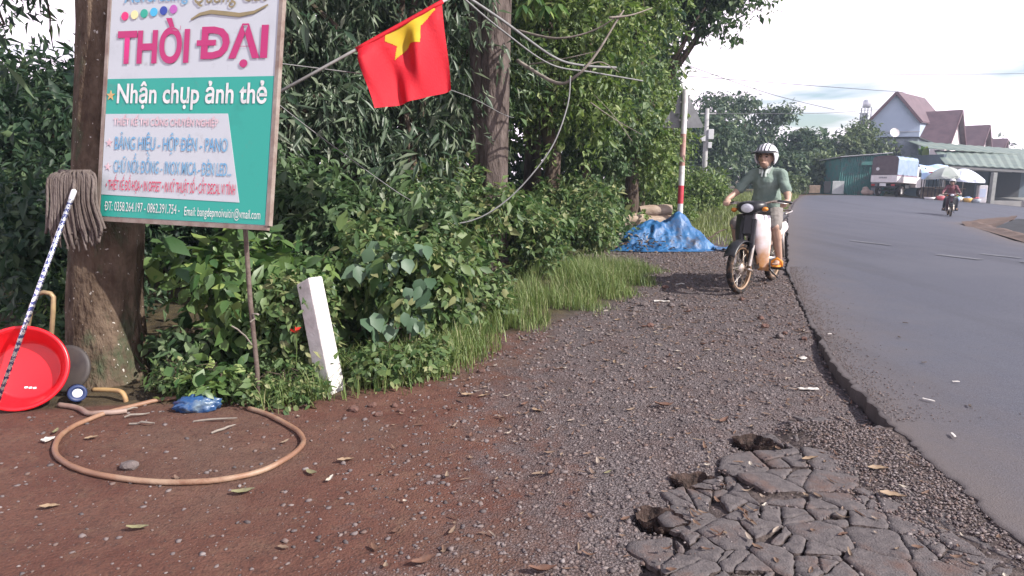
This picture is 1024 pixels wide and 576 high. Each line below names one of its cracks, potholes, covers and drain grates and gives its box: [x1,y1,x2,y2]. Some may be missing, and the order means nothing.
pothole [669,471,725,492]
pothole [731,433,775,452]
pothole [635,505,691,536]
crack [626,417,1024,576]
